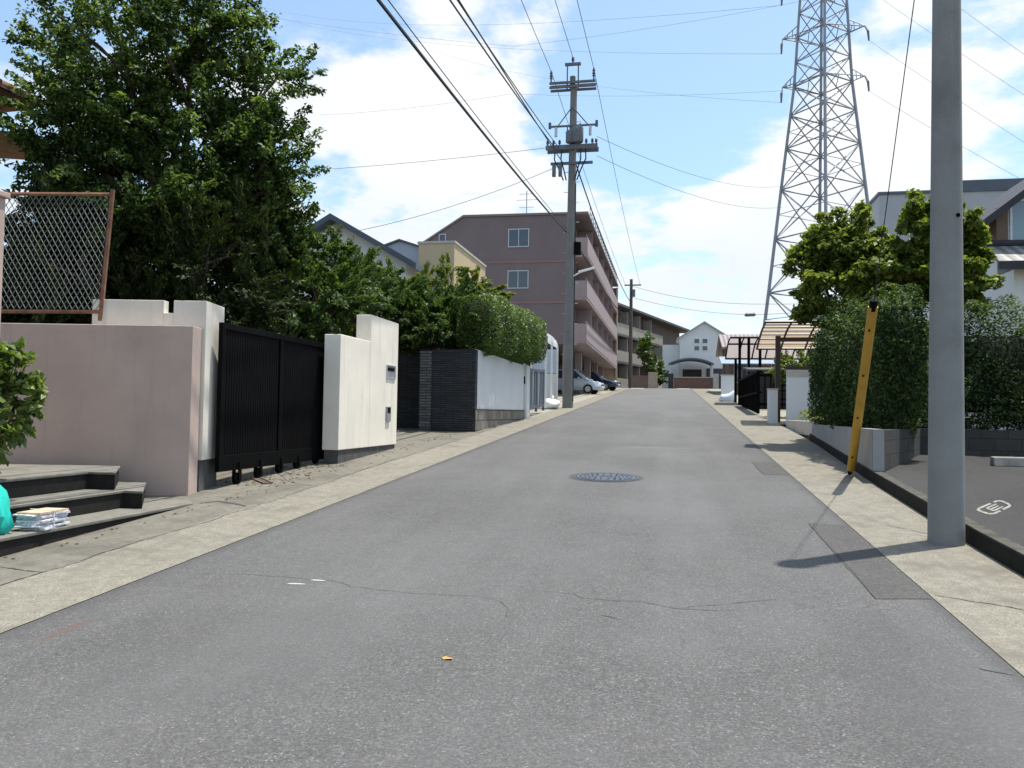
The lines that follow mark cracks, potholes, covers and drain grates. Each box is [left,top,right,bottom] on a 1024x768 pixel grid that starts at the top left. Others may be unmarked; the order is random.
crack [544,591,770,620]
crack [179,572,508,617]
manhole cover [568,472,644,482]
